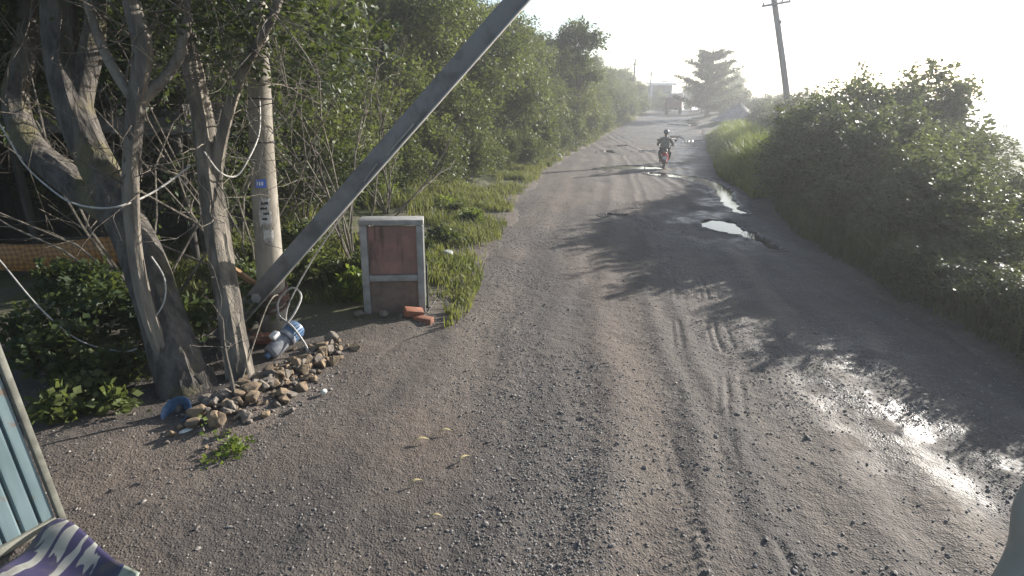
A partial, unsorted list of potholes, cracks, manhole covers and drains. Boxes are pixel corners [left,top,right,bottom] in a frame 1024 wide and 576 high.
pothole [692,218,790,253]
pothole [641,171,756,216]
